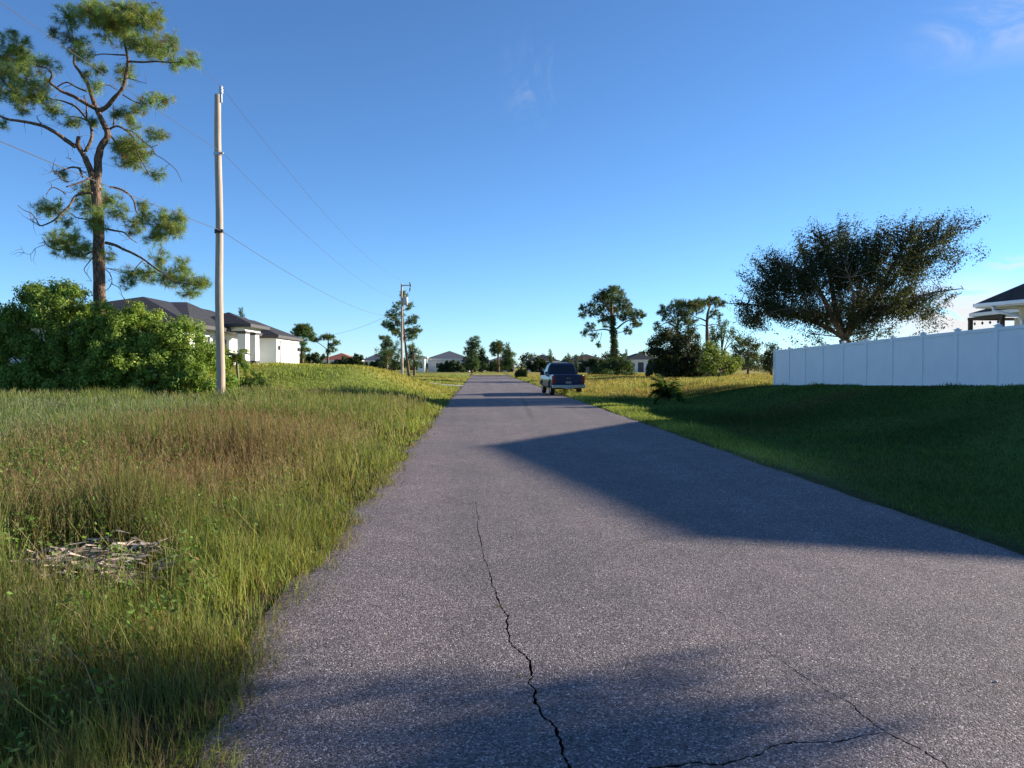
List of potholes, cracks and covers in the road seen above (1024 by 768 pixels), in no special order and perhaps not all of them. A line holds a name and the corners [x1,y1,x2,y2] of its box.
crack [476,510,572,768]
crack [649,612,948,768]
